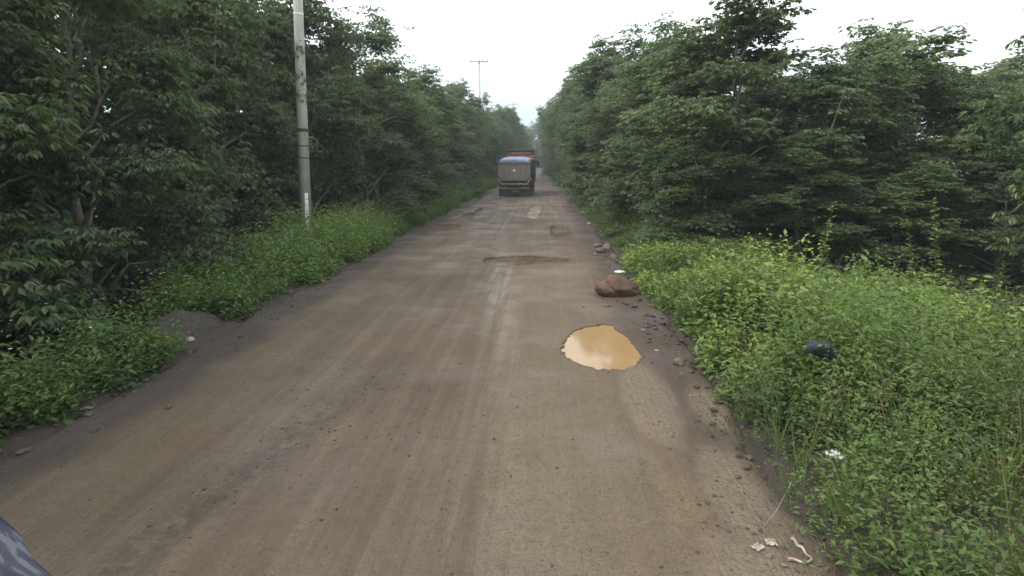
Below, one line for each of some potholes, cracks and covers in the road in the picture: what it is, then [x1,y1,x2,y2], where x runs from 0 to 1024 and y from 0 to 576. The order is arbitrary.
pothole [548,224,575,238]
pothole [422,224,462,232]
pothole [558,323,645,371]
pothole [481,255,571,266]
